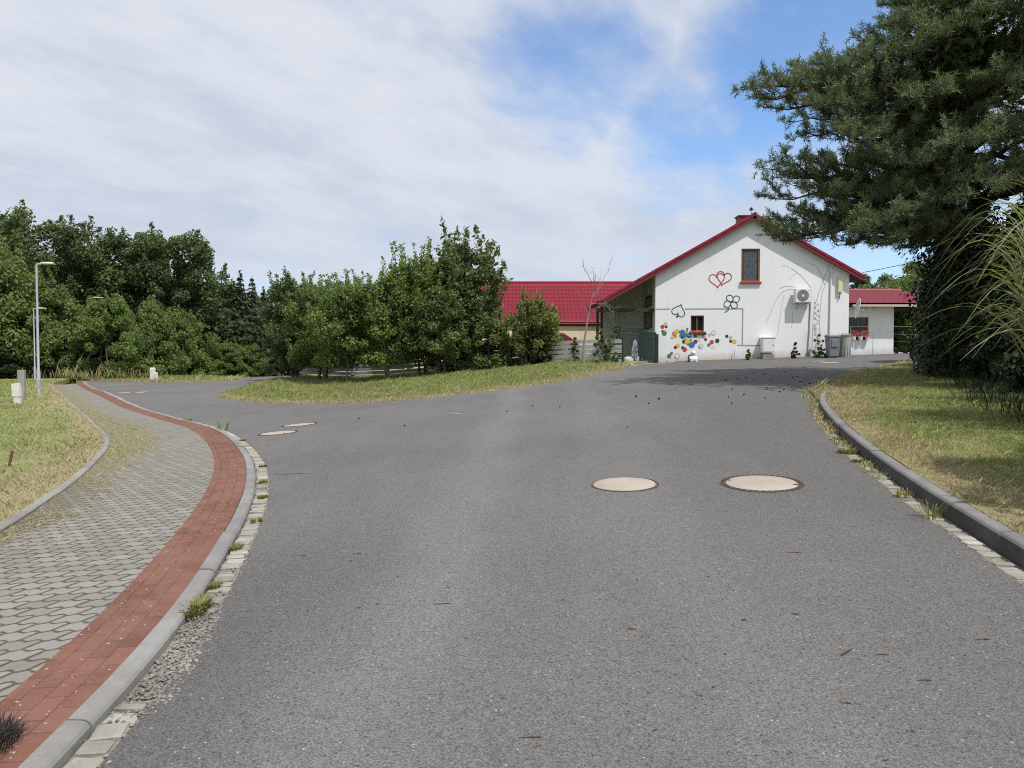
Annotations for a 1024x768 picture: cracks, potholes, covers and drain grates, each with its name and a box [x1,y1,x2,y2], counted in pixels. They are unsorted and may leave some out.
manhole cover [591,477,659,492]
manhole cover [720,474,804,493]
